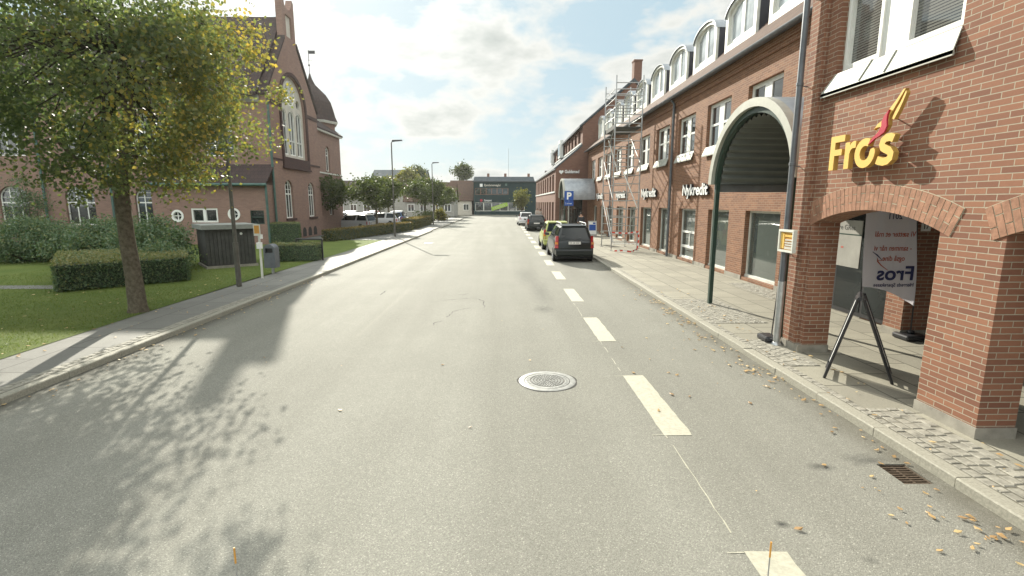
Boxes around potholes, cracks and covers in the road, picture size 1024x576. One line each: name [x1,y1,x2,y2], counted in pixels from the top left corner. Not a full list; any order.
manhole cover [517,371,577,392]
drain grate [878,465,932,484]
